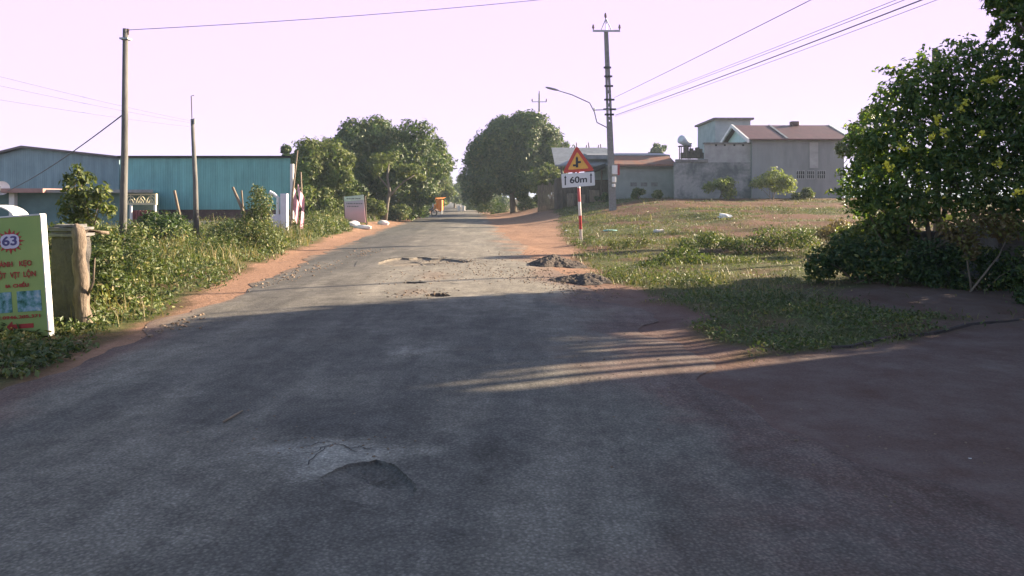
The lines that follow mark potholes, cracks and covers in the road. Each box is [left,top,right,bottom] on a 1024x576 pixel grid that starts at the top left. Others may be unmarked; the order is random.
pothole [378,257,472,267]
pothole [320,460,418,505]
crack [285,441,370,466]
